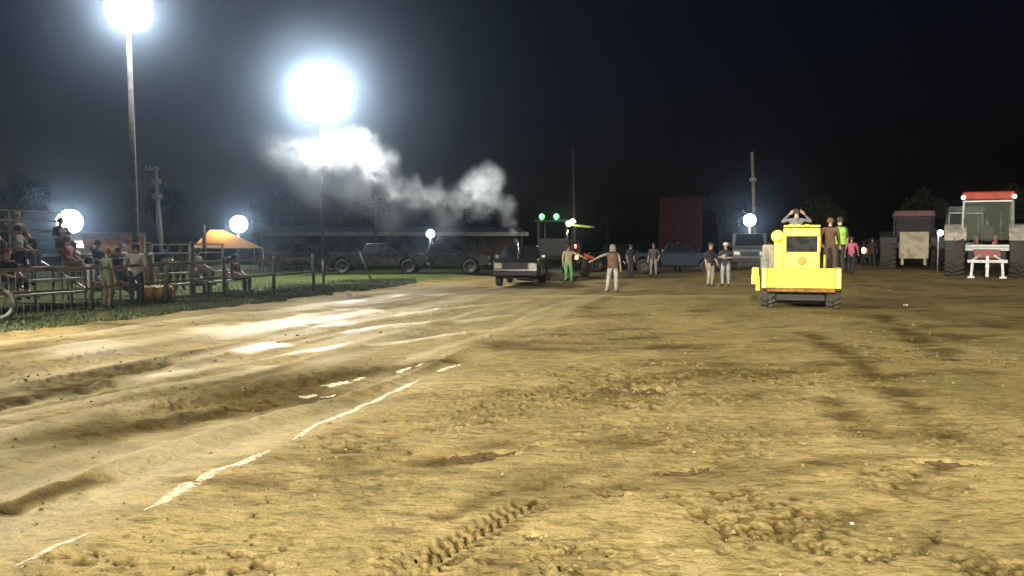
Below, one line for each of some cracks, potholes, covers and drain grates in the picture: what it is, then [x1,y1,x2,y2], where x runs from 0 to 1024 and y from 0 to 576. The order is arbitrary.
pothole [447,451,516,464]
pothole [918,460,992,468]
